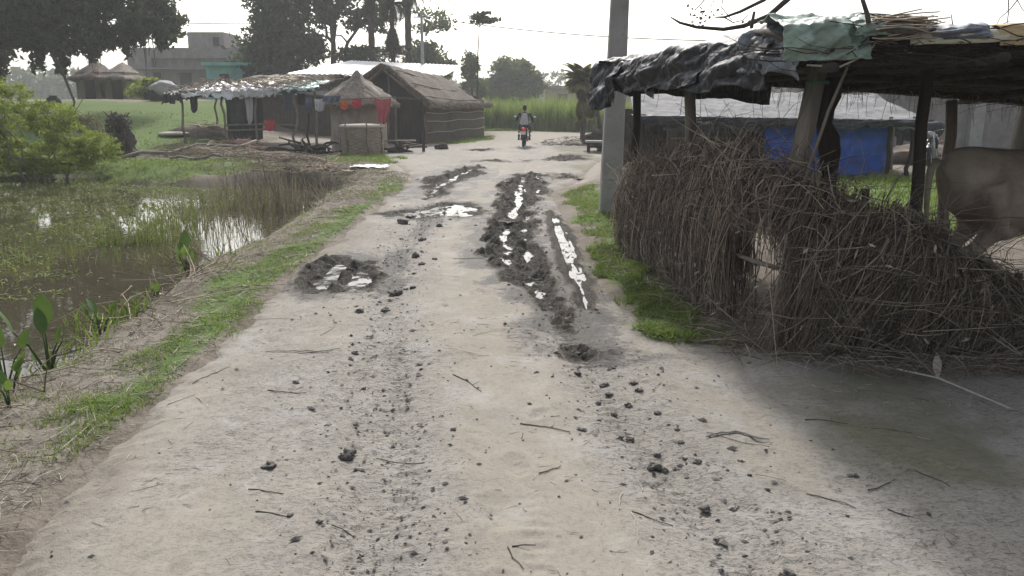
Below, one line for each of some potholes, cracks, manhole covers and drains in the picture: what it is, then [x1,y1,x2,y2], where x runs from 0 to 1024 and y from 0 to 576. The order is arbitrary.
pothole [560,343,601,365]
pothole [481,171,554,223]
pothole [288,254,390,294]
pothole [369,201,485,221]
pothole [543,210,602,312]
pothole [414,164,487,200]
pothole [473,217,576,325]
